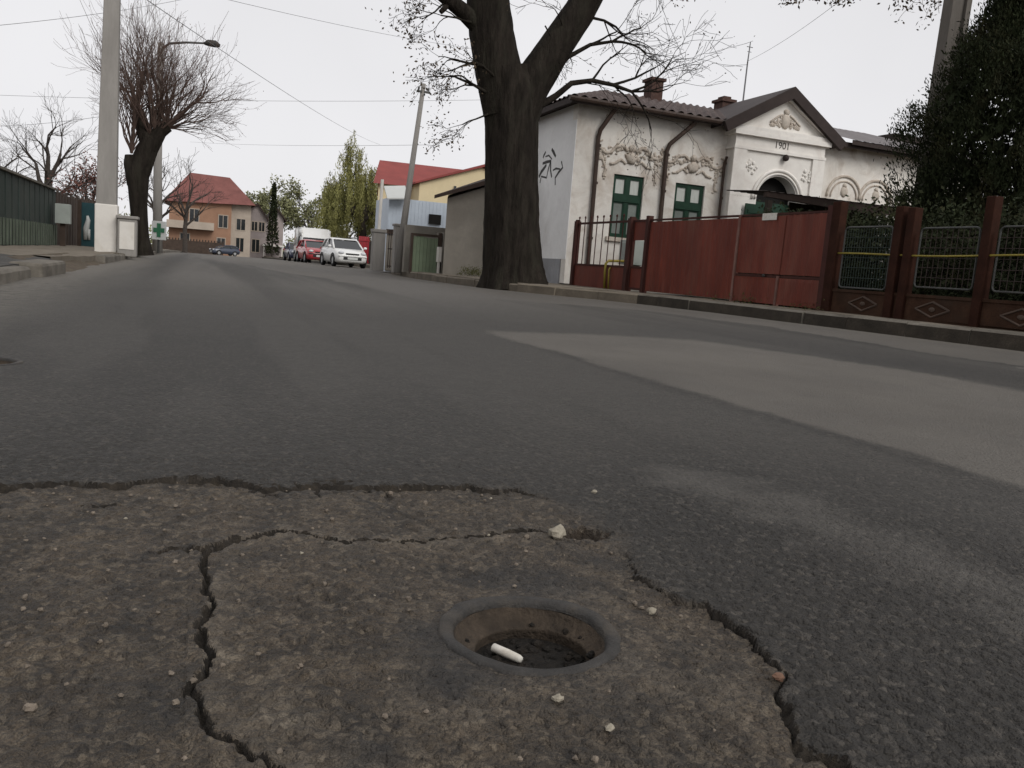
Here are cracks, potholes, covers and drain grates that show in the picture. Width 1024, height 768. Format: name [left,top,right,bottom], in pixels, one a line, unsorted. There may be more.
crack [631,569,854,768]
manhole cover [438,596,621,677]
crack [158,528,549,768]
crack [0,474,535,508]
